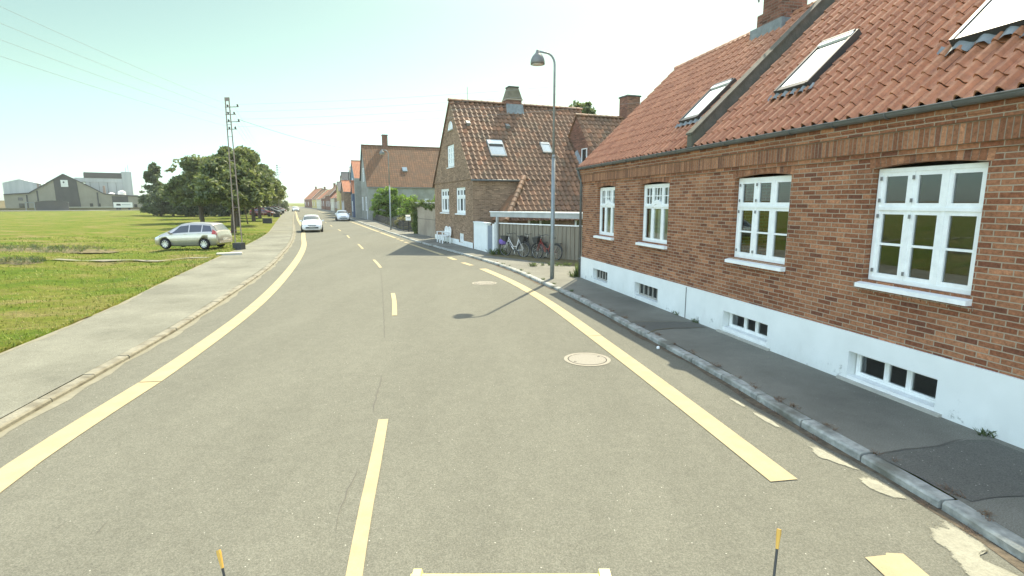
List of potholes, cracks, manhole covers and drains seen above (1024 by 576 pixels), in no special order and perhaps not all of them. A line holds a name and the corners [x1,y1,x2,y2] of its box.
crack [336,467,358,527]
manhole cover [564,353,611,366]
